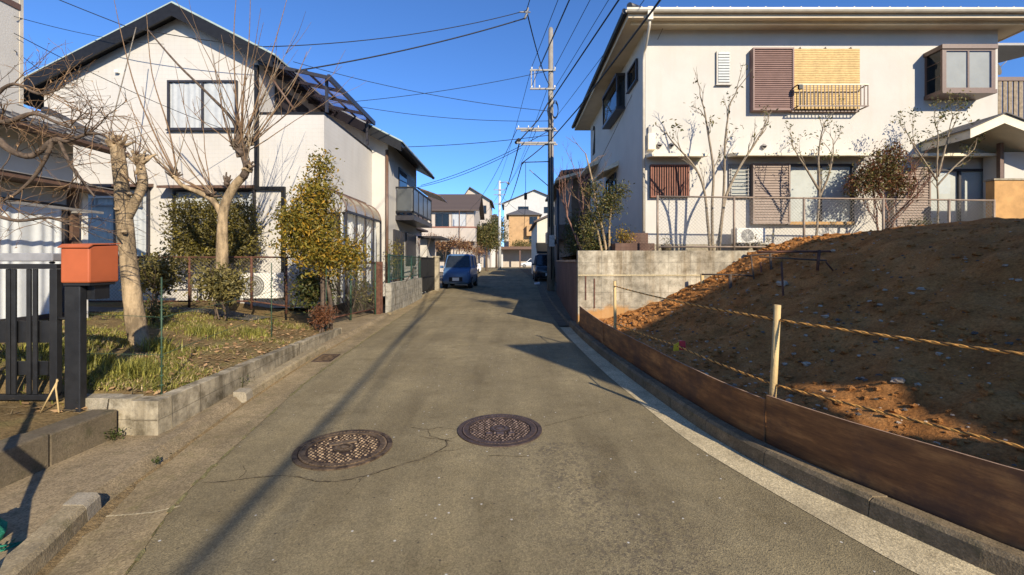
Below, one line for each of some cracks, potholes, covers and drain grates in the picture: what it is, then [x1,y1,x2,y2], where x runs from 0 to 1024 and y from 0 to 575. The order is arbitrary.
crack [204,427,460,494]
manhole cover [457,414,542,447]
manhole cover [291,429,393,471]
drain grate [311,354,340,362]
